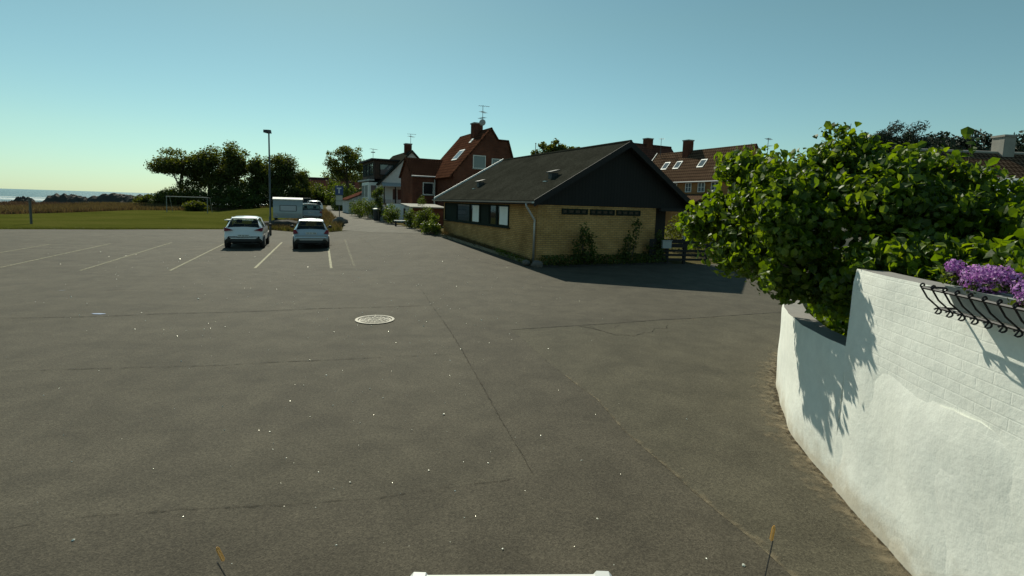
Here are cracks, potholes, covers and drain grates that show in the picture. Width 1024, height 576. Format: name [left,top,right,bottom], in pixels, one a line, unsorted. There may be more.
manhole cover [355,315,394,325]
